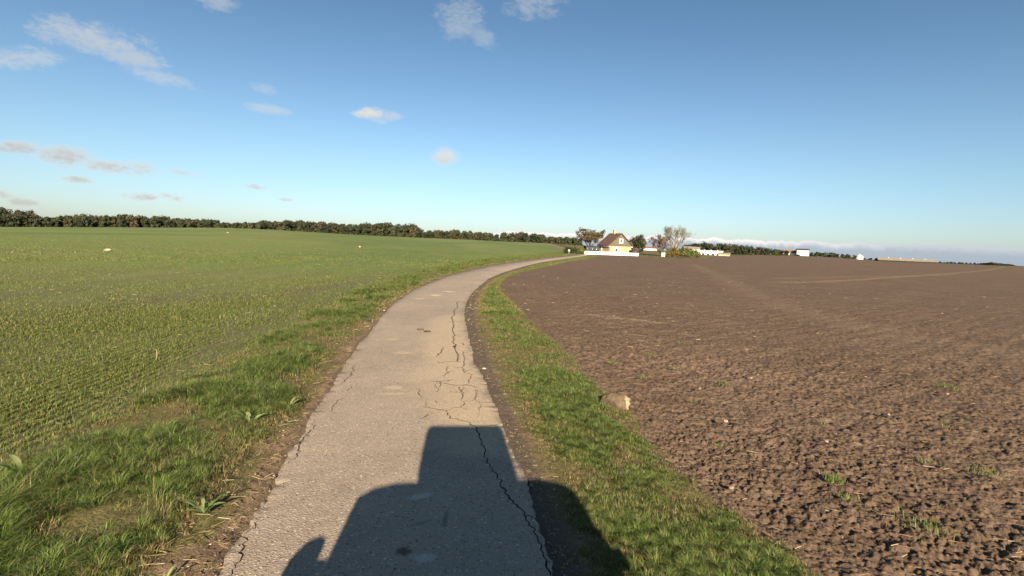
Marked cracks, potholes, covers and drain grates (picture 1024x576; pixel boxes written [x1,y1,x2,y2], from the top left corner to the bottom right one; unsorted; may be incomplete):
crack [231,500,267,576]
crack [416,303,551,576]
crack [288,364,356,462]
